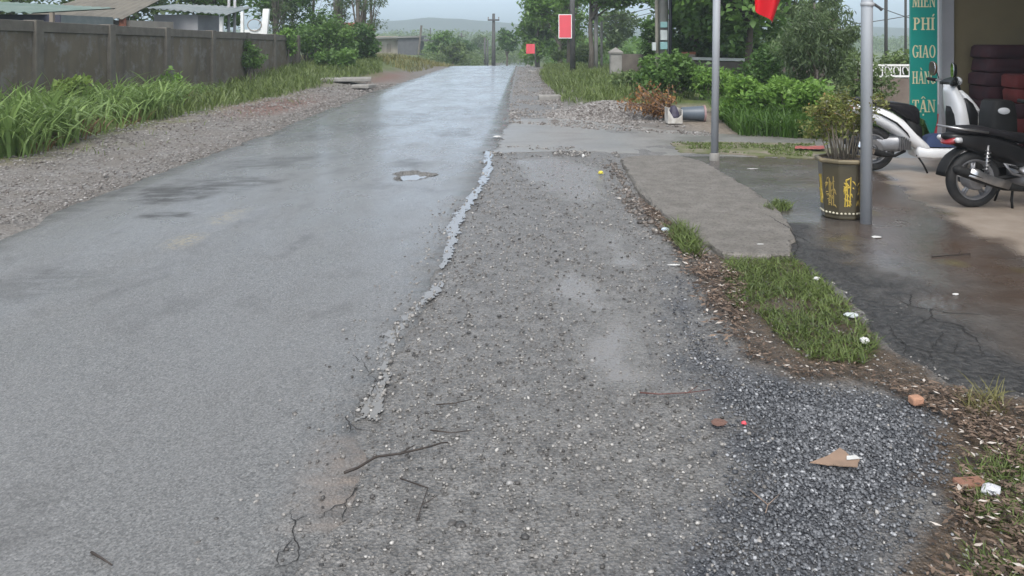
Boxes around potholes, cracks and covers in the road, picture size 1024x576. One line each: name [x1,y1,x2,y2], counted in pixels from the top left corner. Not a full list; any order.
crack [886,293,984,364]
pothole [393,170,438,181]
